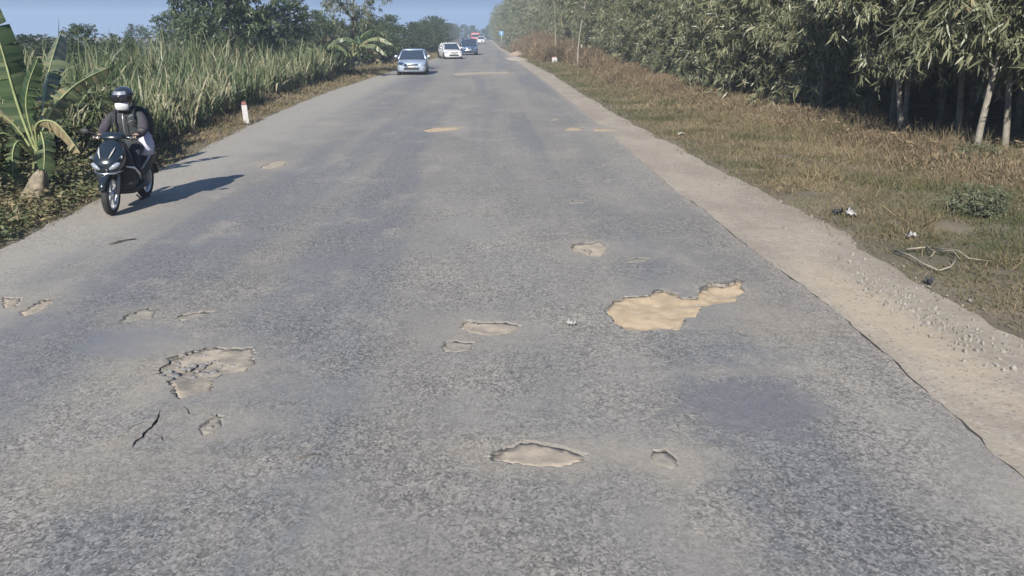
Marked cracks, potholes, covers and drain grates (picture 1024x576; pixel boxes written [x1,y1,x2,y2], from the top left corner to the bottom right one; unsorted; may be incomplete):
pothole [115,307,160,323]
pothole [17,296,61,317]
pothole [174,310,216,321]
pothole [485,440,590,467]
pothole [197,413,225,435]
crack [128,406,195,447]
pothole [604,278,746,331]
pothole [650,448,680,469]
pothole [568,240,610,257]
pothole [261,160,291,170]
pothole [1,296,23,309]
pothole [151,346,257,399]
